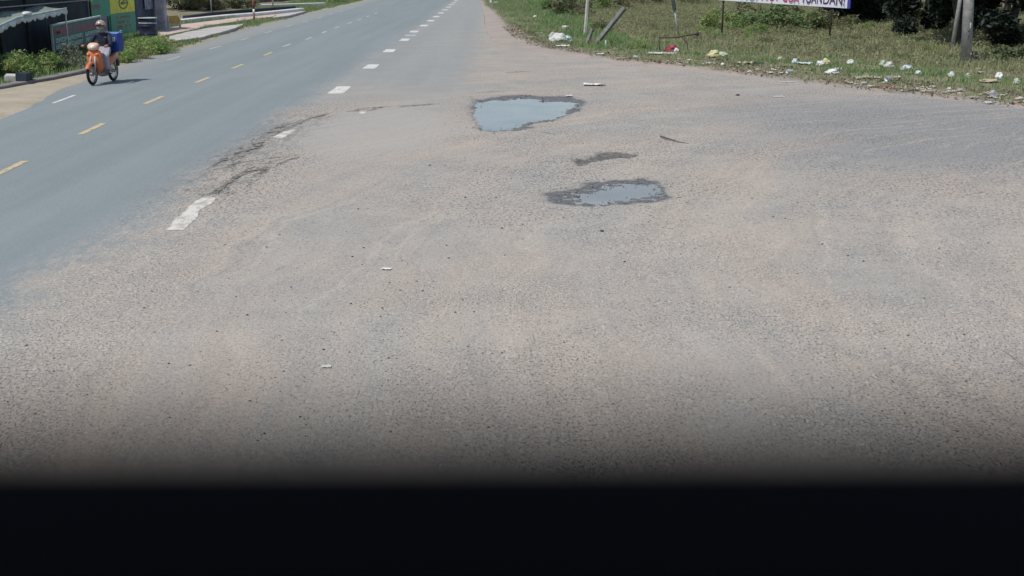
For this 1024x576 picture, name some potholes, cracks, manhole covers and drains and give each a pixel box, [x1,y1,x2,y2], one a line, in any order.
pothole [464,94,592,132]
pothole [567,149,643,166]
pothole [537,177,679,208]
crack [185,104,432,197]
